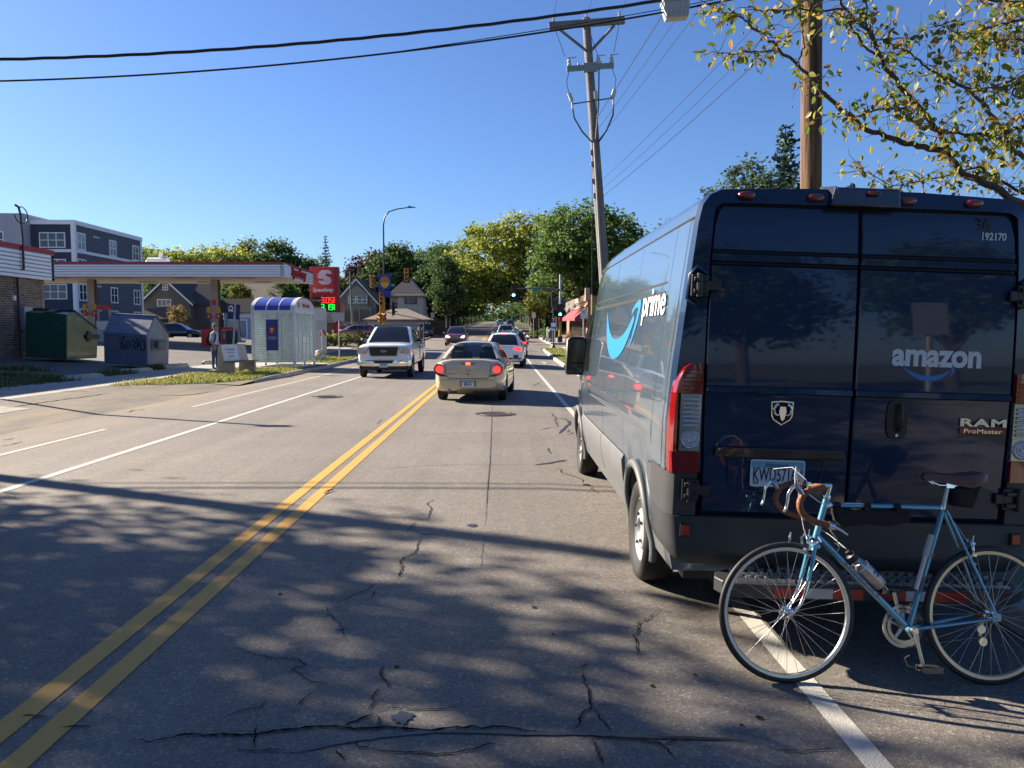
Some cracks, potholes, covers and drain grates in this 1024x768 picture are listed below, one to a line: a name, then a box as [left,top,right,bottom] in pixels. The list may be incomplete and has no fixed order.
crack [571,663,678,764]
crack [632,609,659,655]
crack [398,497,438,576]
crack [325,583,378,640]
crack [124,667,546,762]
crack [238,646,342,705]
